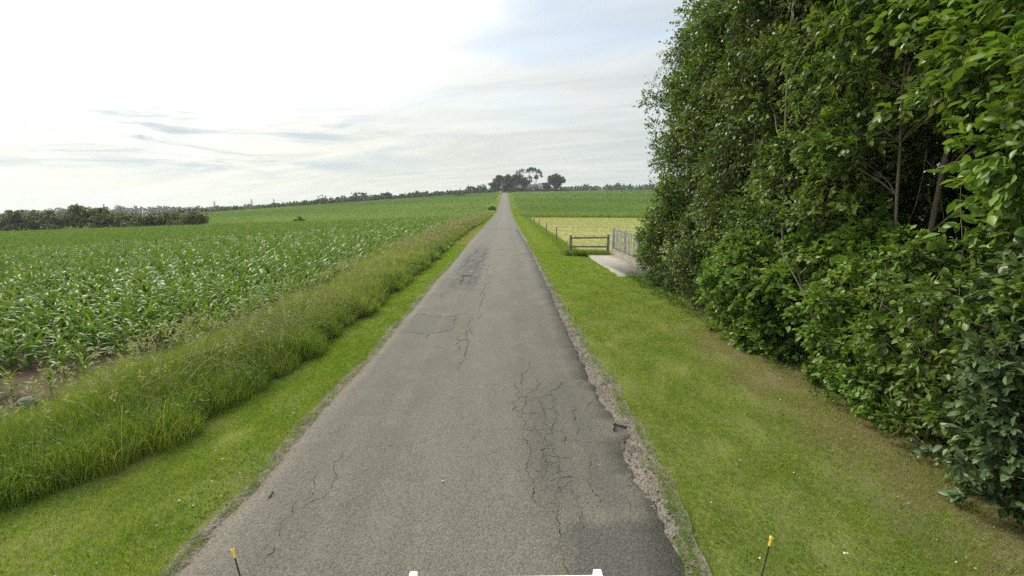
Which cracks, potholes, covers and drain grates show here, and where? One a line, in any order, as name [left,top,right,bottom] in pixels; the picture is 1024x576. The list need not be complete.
crack [258,443,348,567]
crack [512,362,635,574]
pothole [613,423,631,433]
crack [414,256,491,373]
